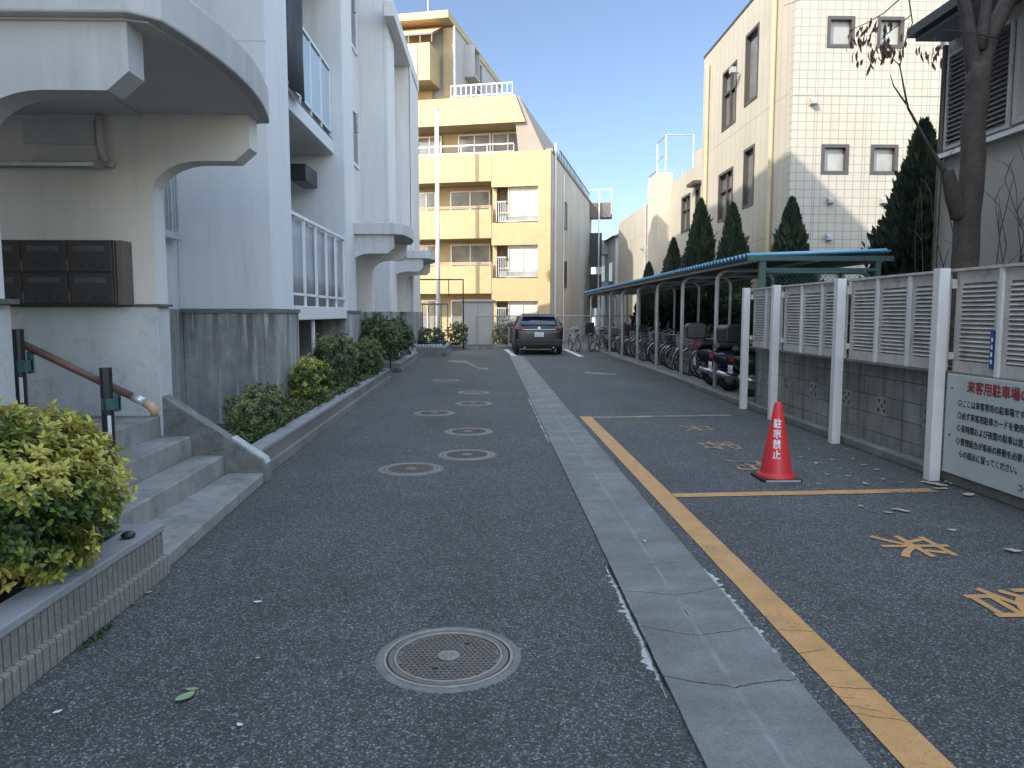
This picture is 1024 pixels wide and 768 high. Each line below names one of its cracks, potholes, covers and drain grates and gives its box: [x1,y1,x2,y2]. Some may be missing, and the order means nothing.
manhole cover [375,627,521,693]
manhole cover [437,449,497,461]
manhole cover [444,428,493,436]
manhole cover [378,462,444,476]
crack [608,565,791,690]
crack [829,669,908,722]
